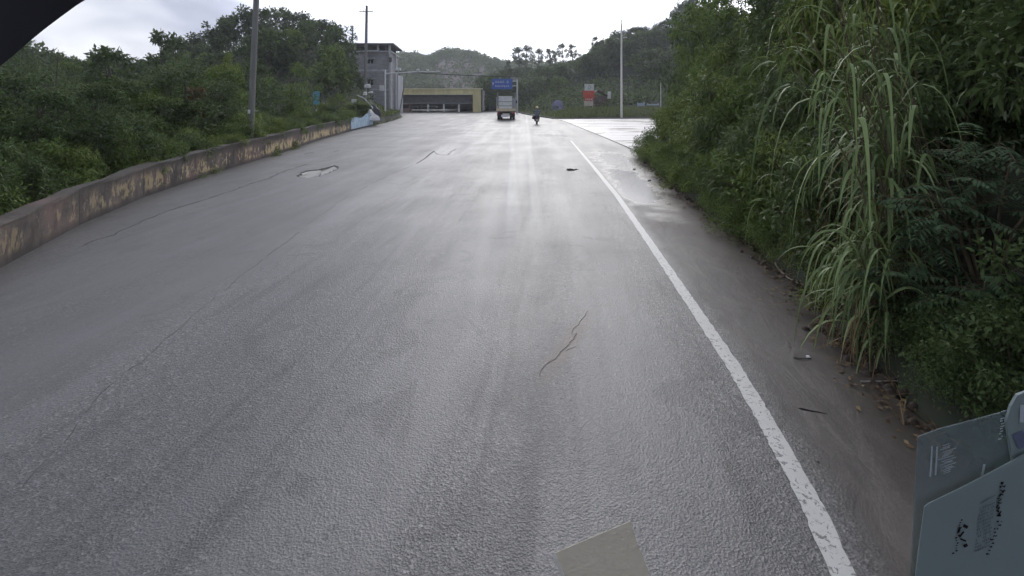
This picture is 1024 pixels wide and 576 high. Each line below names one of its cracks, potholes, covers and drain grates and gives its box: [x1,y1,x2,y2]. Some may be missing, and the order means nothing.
crack [539,312,587,379]
pothole [297,165,338,178]
crack [83,150,339,246]
